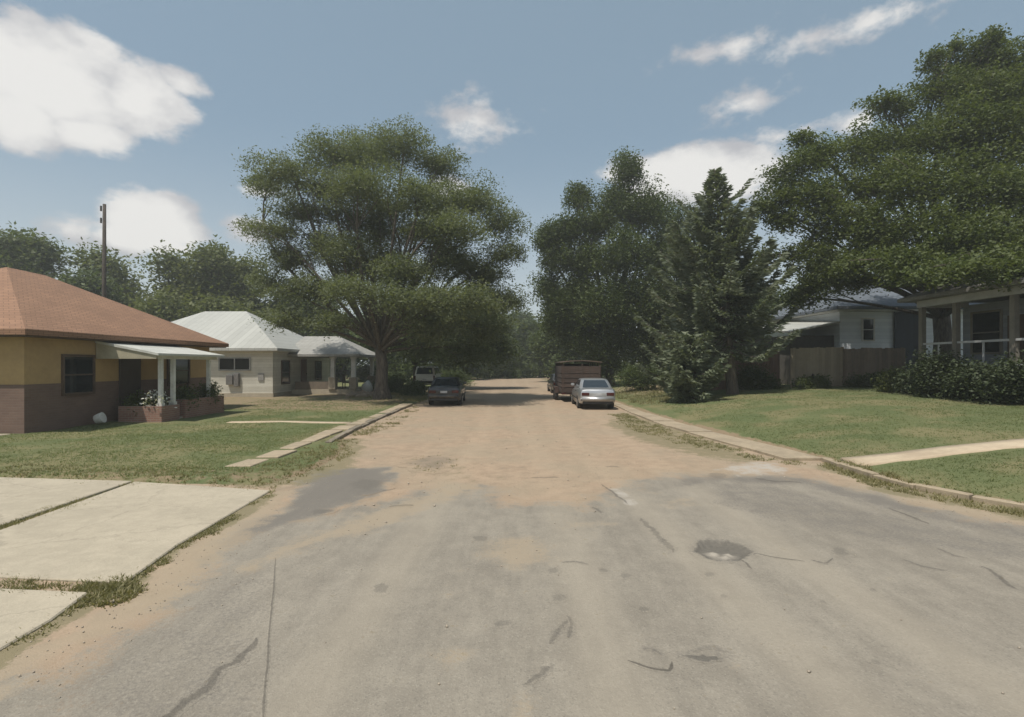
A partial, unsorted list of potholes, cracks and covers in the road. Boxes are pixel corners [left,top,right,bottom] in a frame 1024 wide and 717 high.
crack [741,552,834,569]
crack [591,465,678,552]
crack [903,548,1016,589]
crack [547,615,576,644]
crack [155,638,261,717]
crack [628,647,675,673]
crack [525,666,553,684]
pothole [685,537,764,564]
